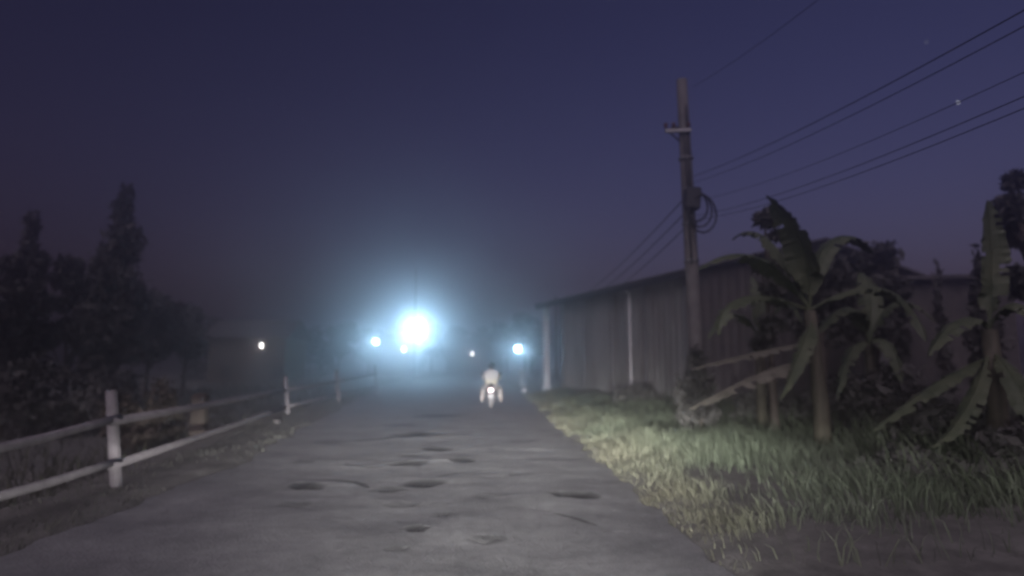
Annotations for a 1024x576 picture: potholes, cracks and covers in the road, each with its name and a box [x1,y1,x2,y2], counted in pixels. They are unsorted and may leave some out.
pothole [546,490,606,499]
crack [554,513,598,526]
pothole [397,478,449,488]
pothole [462,534,509,545]
pothole [284,481,327,491]
pothole [397,524,433,532]
